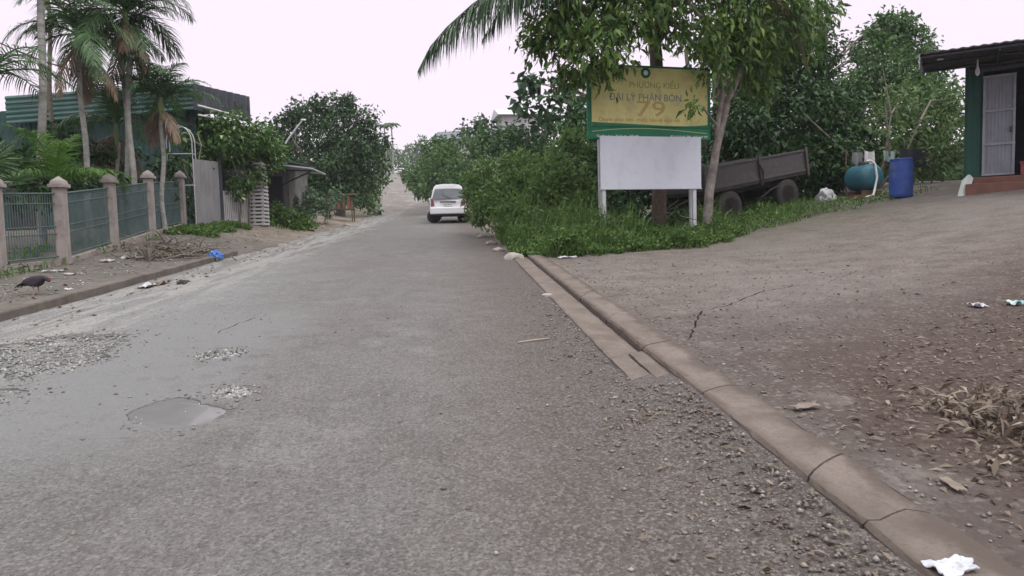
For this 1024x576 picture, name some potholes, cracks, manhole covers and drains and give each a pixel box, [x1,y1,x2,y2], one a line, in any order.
crack [687,269,861,340]
pothole [195,348,253,361]
pothole [0,333,131,381]
pothole [209,384,252,399]
pothole [127,397,228,429]
